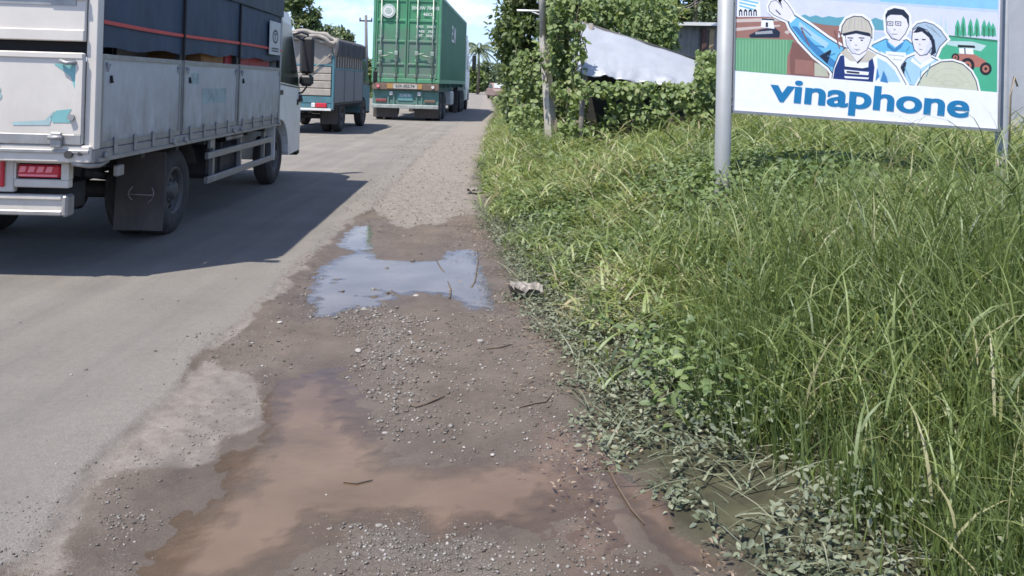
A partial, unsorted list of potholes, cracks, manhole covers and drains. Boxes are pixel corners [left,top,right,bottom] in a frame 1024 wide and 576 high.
pothole [290,222,512,320]
pothole [122,359,713,576]
